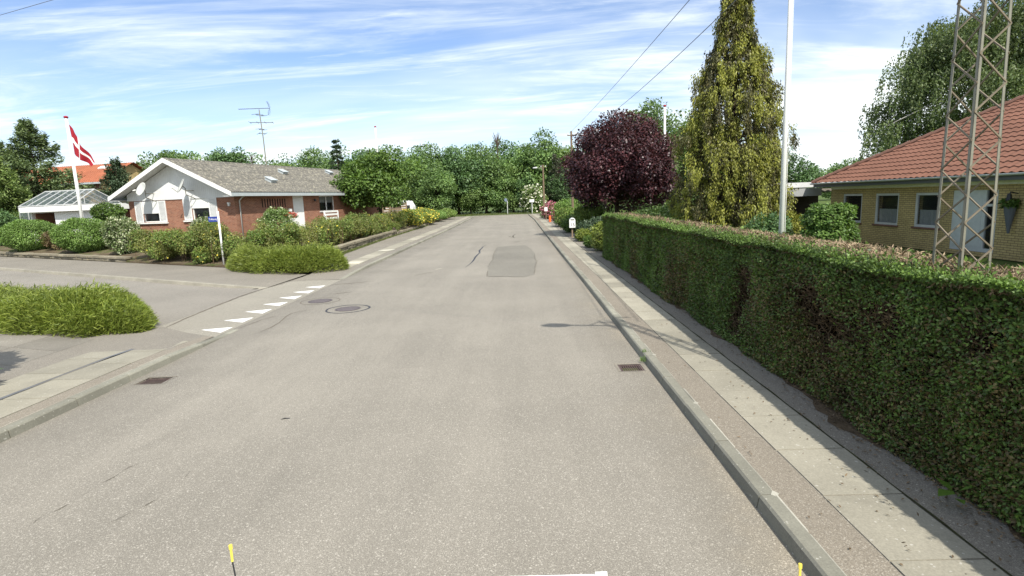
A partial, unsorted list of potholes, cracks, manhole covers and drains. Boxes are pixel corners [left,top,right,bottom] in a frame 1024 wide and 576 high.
drain grate [134,376,177,385]
drain grate [614,363,645,372]
manhole cover [325,305,370,313]
